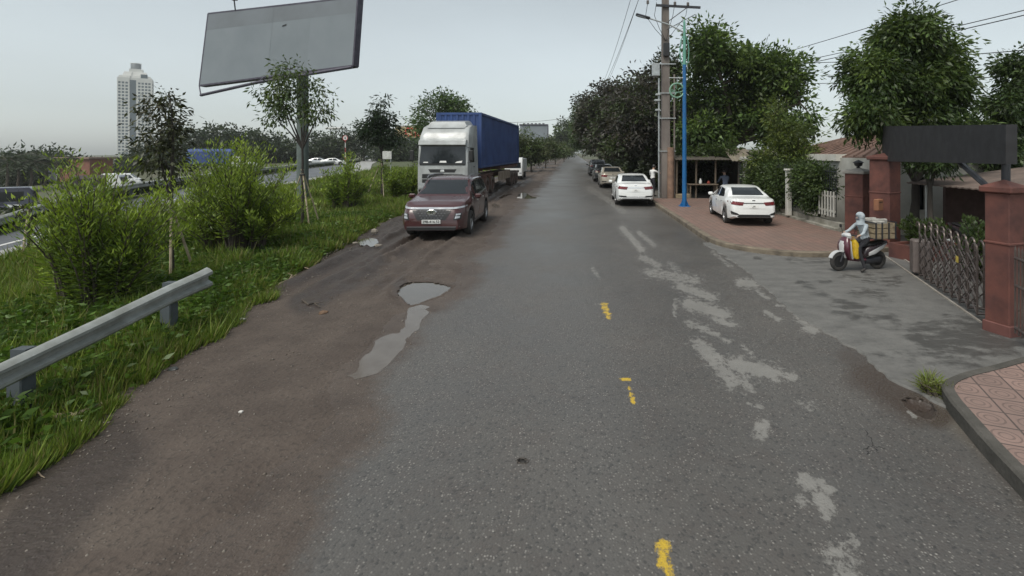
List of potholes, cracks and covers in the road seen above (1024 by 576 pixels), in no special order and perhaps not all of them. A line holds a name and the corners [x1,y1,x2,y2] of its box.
pothole [397,280,456,308]
pothole [899,396,939,421]
